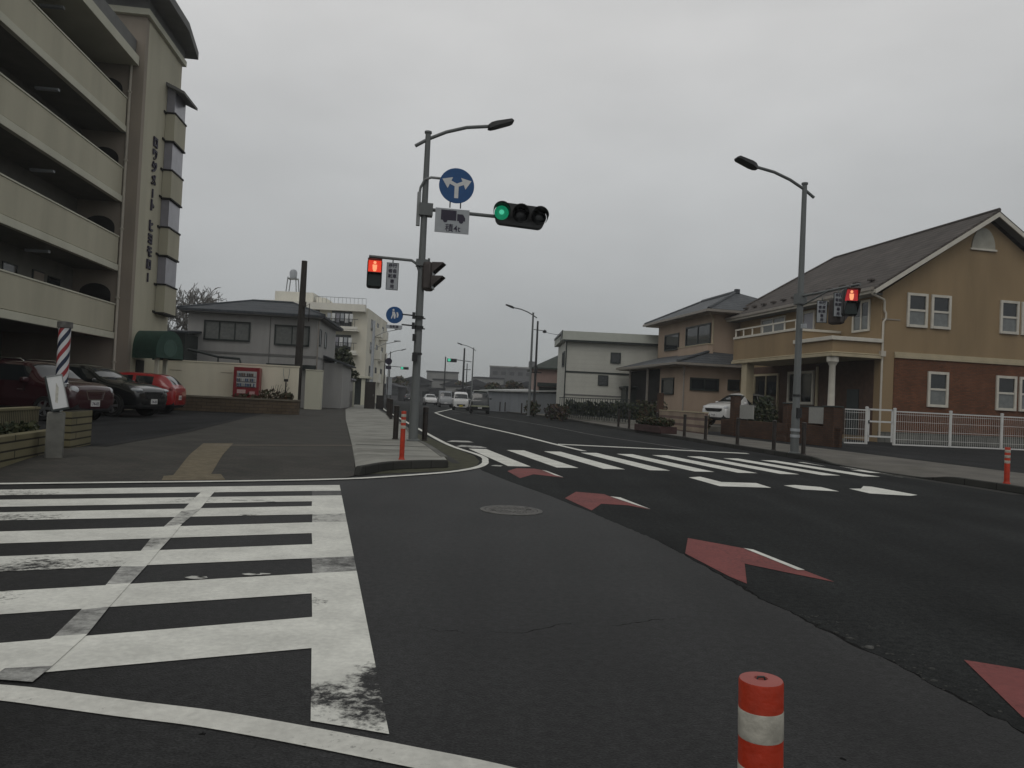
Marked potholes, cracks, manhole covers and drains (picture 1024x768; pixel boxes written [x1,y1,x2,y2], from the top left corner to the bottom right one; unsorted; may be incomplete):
manhole cover [480,505,543,515]
crack [426,617,680,633]
